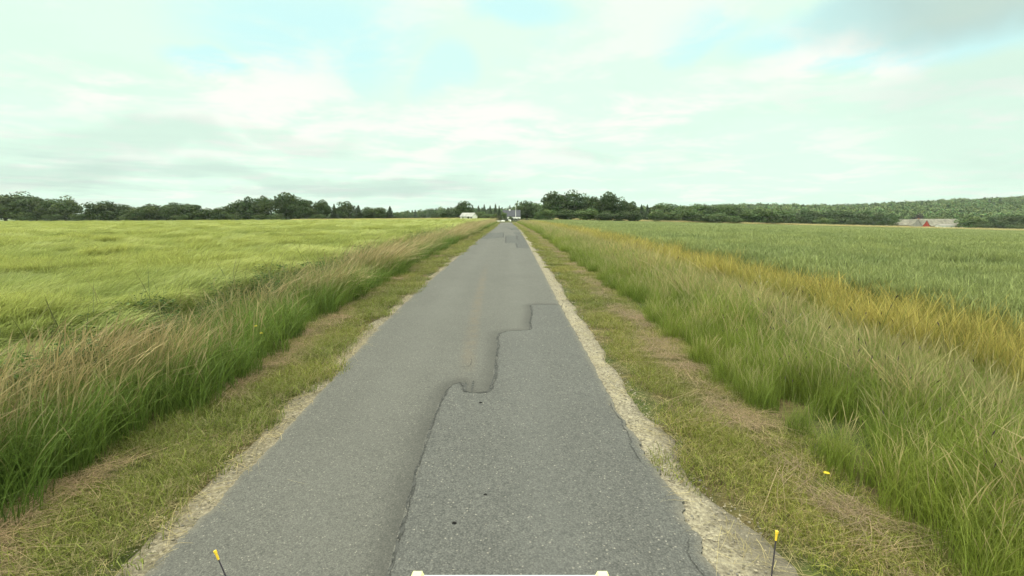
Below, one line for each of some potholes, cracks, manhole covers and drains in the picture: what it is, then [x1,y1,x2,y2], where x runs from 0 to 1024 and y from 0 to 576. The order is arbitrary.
crack [610,402,641,461]
